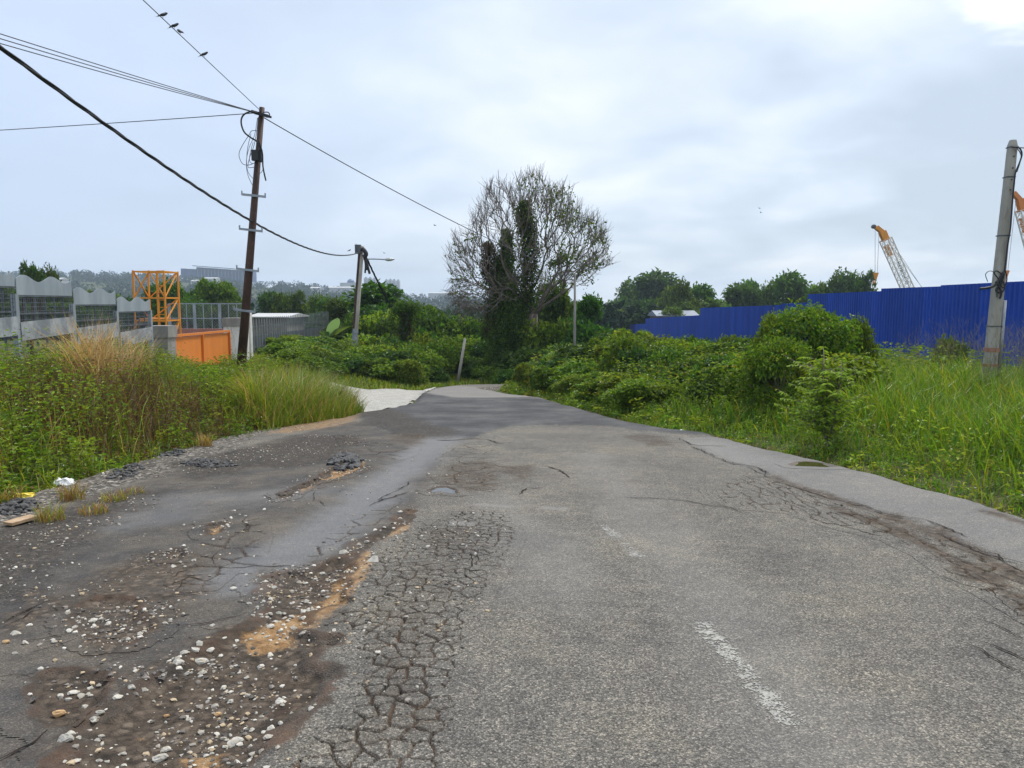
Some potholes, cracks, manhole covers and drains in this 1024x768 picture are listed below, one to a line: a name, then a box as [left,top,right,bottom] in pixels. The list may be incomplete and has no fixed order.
crack [628,438,1024,673]
pothole [415,485,470,496]
crack [163,435,570,768]
pothole [5,508,430,768]
pothole [774,459,852,470]
